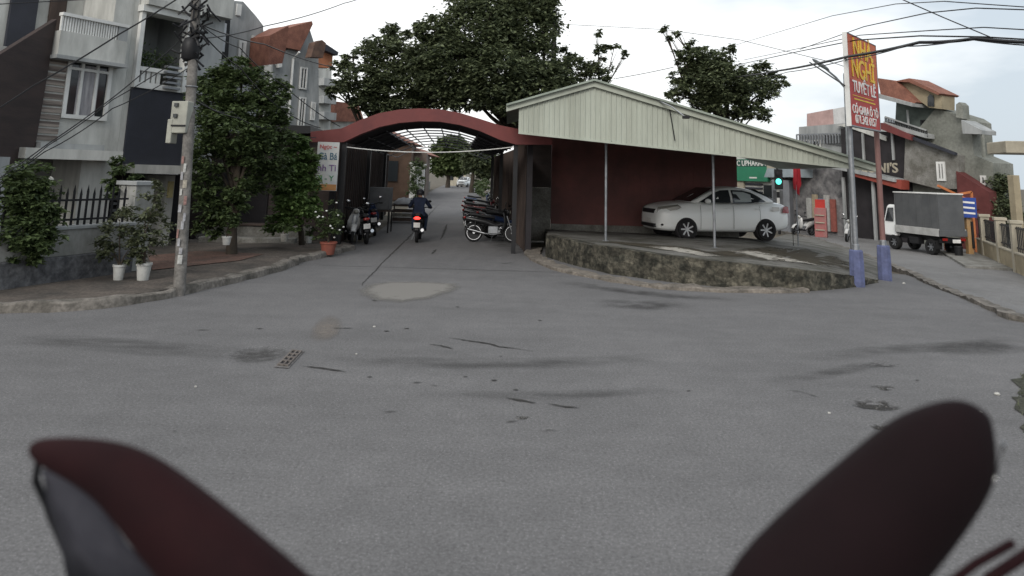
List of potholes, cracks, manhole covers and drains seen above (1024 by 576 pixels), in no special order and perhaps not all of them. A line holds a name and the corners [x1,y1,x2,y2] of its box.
drain grate [274,349,304,368]
crack [433,337,531,351]
pothole [857,401,898,411]
